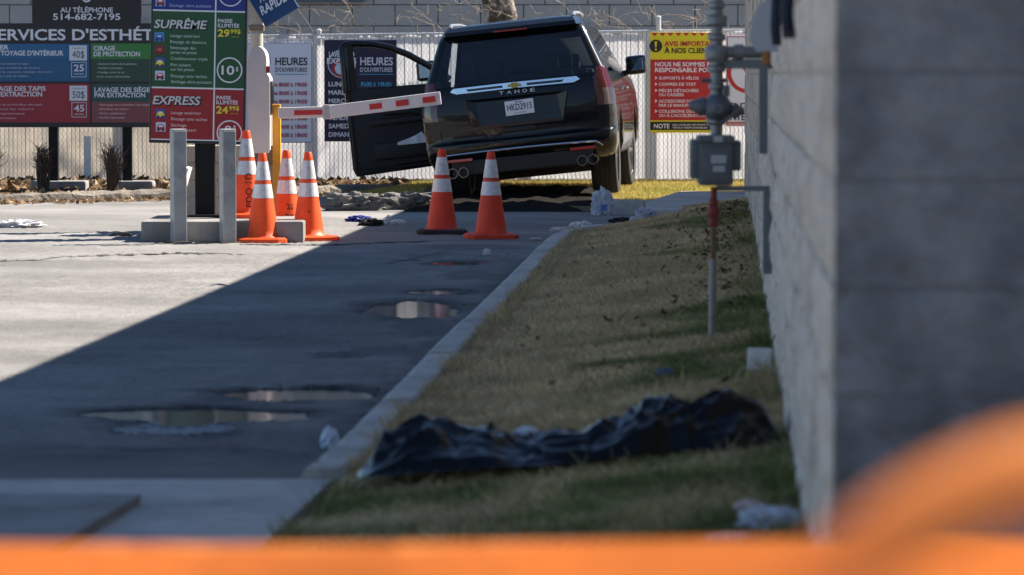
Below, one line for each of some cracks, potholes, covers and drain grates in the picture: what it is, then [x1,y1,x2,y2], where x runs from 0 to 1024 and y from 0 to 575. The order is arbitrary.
pothole [71,404,309,426]
pothole [356,298,468,318]
pothole [203,384,392,402]
